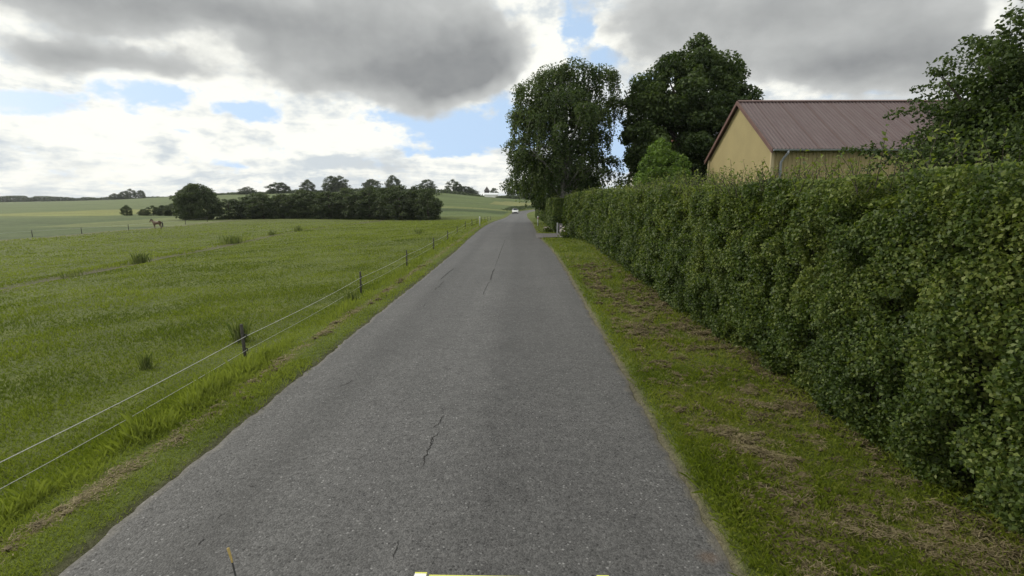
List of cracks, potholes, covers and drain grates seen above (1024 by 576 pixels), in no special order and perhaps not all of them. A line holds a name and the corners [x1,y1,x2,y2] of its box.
crack [423,408,443,465]
